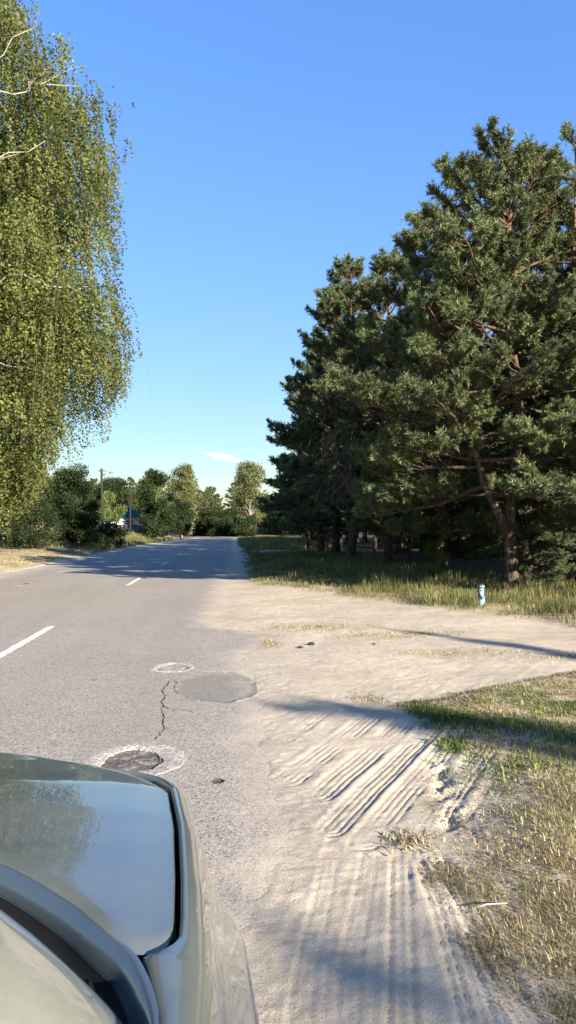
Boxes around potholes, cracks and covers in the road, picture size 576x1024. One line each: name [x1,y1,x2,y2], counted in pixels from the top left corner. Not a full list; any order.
manhole cover [151,662,194,673]
manhole cover [83,744,186,776]
crack [155,680,192,740]
